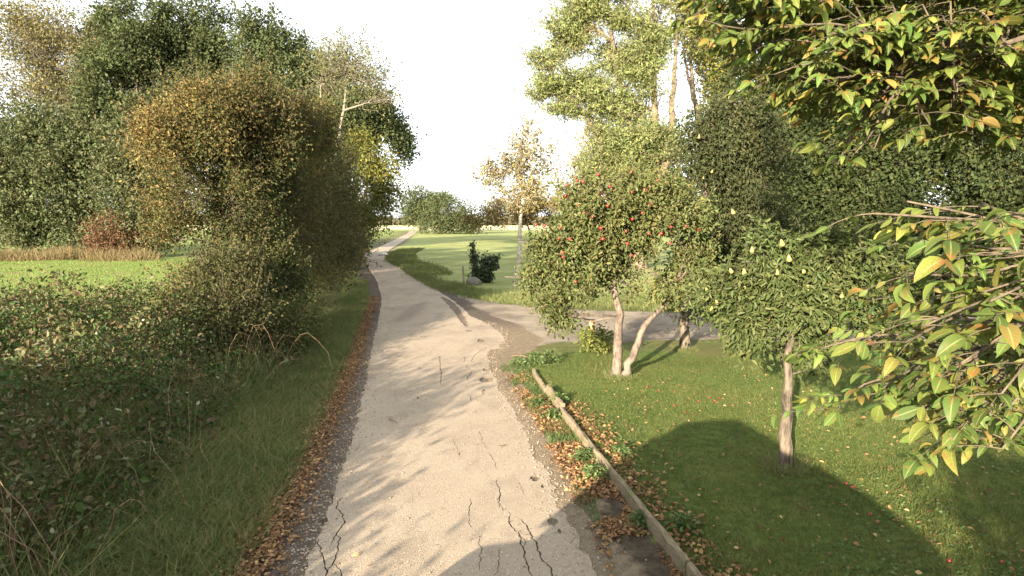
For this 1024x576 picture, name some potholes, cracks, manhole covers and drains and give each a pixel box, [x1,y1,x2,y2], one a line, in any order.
crack [311,497,346,576]
crack [468,431,553,576]
